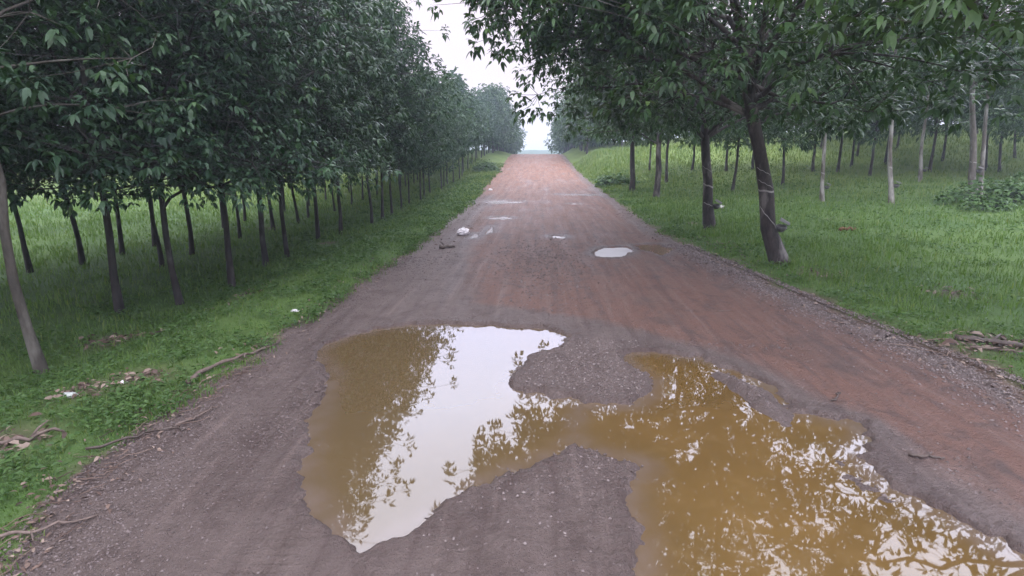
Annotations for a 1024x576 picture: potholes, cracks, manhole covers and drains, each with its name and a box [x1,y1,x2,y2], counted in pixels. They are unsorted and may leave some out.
pothole [573,345,1024,576]
pothole [588,245,641,258]
pothole [282,319,593,564]
